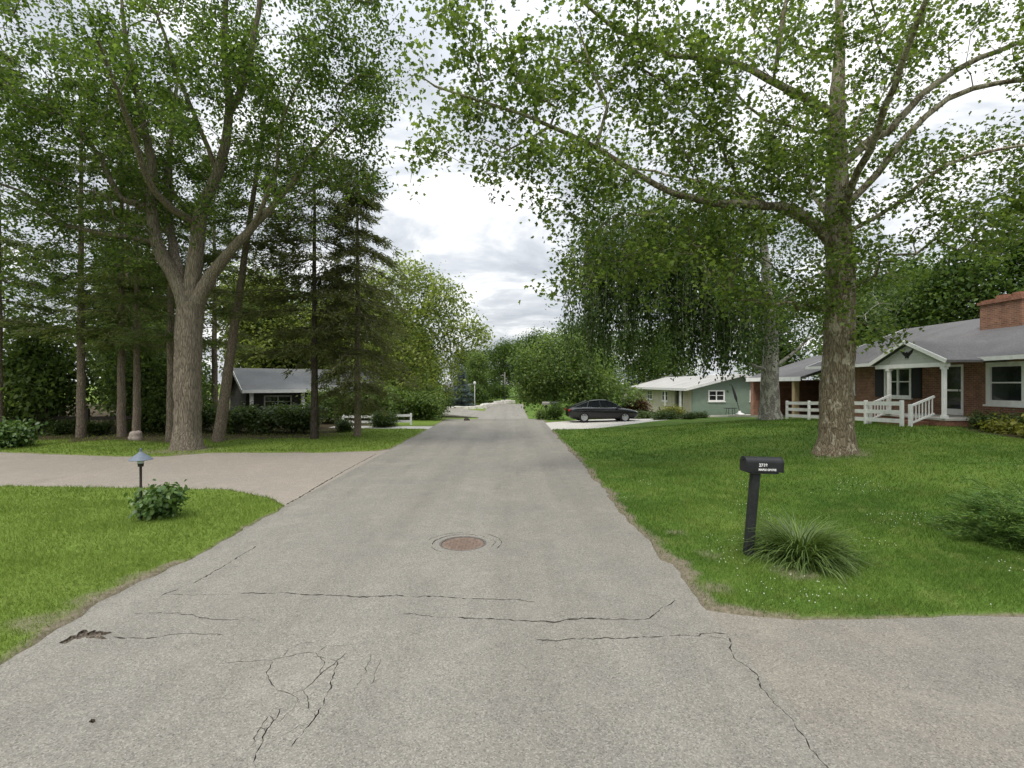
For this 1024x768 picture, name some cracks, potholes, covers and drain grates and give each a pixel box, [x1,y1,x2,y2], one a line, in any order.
crack [161,546,725,641]
manhole cover [439,536,486,551]
crack [227,642,381,765]
pothole [59,630,112,644]
crack [116,612,238,639]
